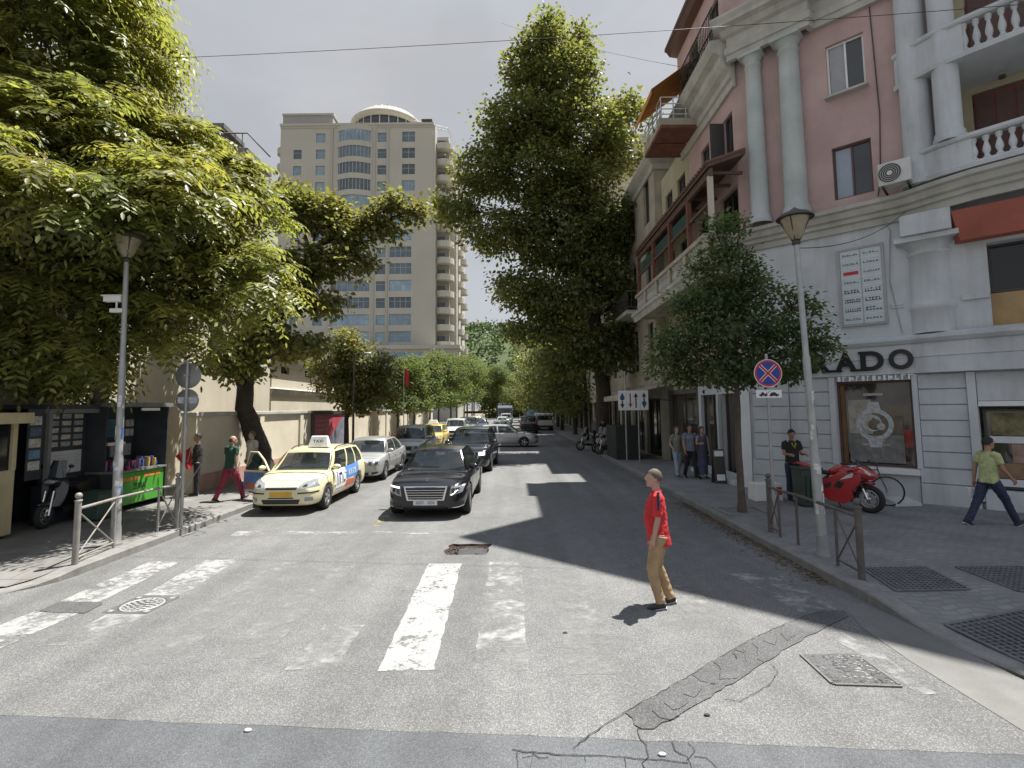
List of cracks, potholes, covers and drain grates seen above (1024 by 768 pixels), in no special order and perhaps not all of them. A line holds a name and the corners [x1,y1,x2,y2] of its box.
drain grate [944,608,1024,664]
pothole [444,544,492,555]
drain grate [955,565,1024,592]
drain grate [865,566,971,592]
manhole cover [799,653,903,688]
manhole cover [102,596,180,614]
crack [512,610,825,768]
